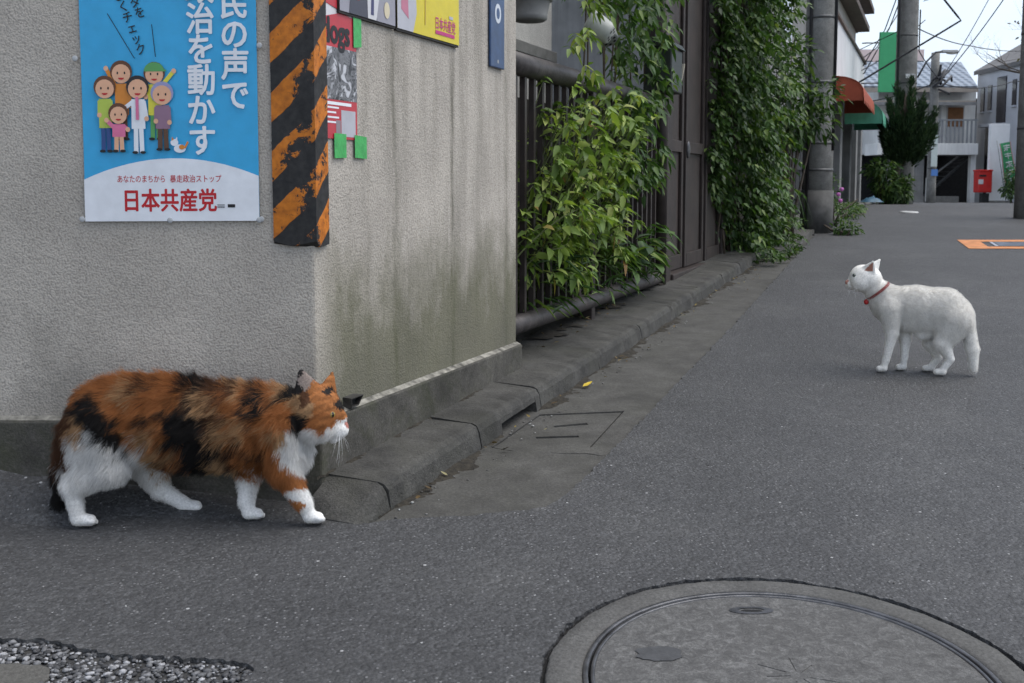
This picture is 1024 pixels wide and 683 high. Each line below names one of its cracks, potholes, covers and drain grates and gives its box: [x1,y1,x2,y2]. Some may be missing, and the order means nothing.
manhole cover [544,581,1024,683]
